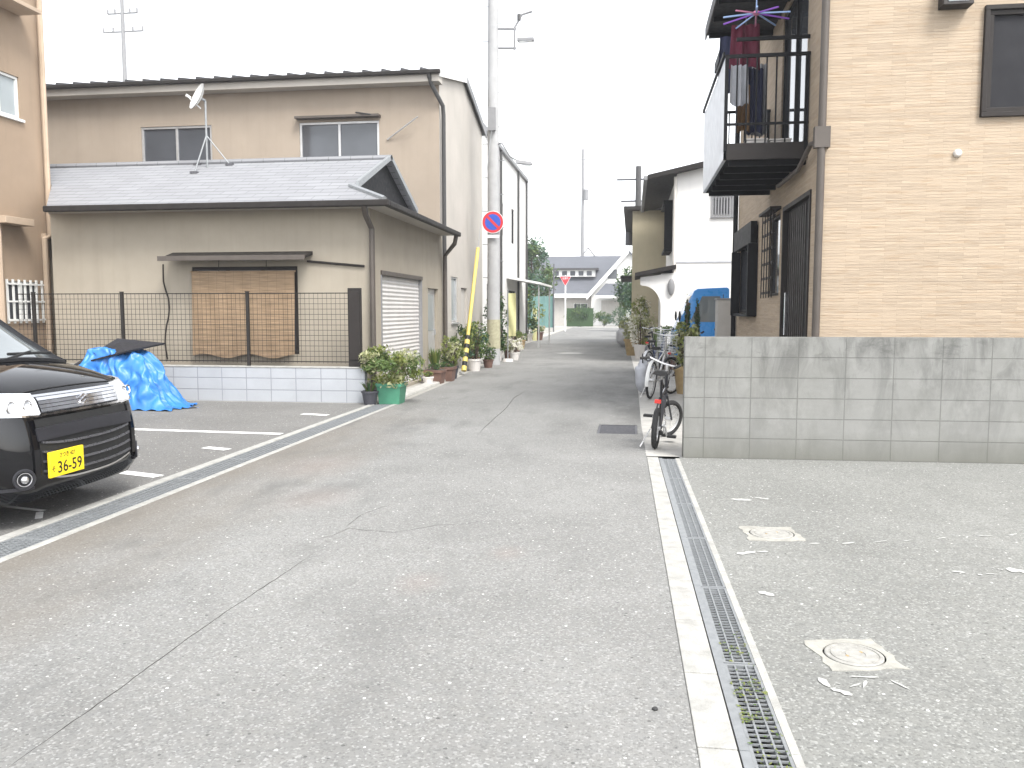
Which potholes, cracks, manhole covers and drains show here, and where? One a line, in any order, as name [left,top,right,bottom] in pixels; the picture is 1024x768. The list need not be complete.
manhole cover [804,638,911,671]
drain grate [686,538,726,588]
drain grate [724,663,796,768]
drain grate [662,459,683,479]
drain grate [676,503,706,538]
drain grate [597,425,637,434]
crack [305,504,473,542]
drain grate [668,478,693,504]
manhole cover [739,526,806,542]
drain grate [701,587,755,665]
crack [9,553,314,767]
